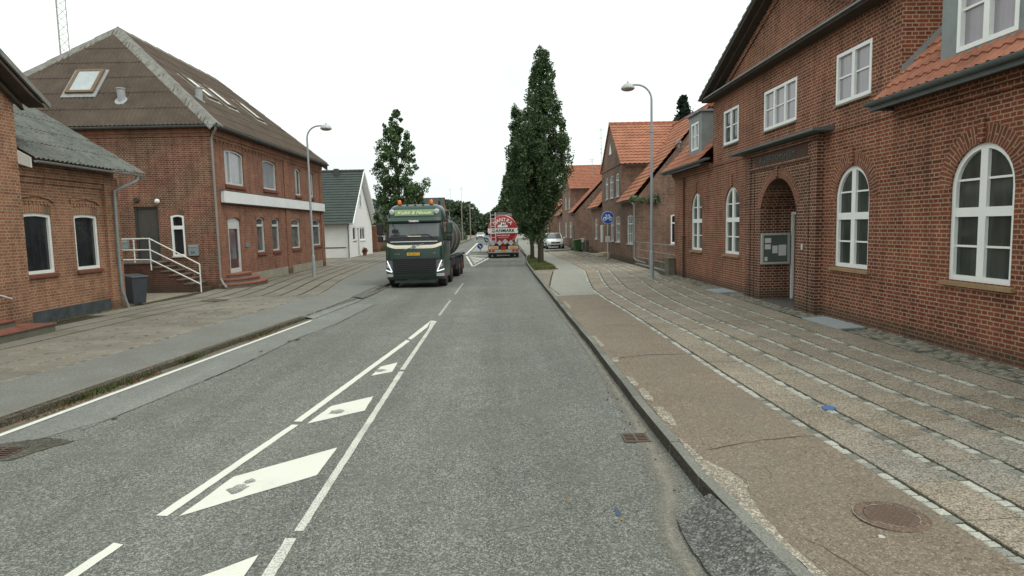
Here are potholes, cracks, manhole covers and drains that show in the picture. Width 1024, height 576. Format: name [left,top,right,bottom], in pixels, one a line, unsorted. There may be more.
drain grate [0,446,30,459]
drain grate [620,433,651,443]
manhole cover [852,501,933,533]
crack [676,519,712,576]
